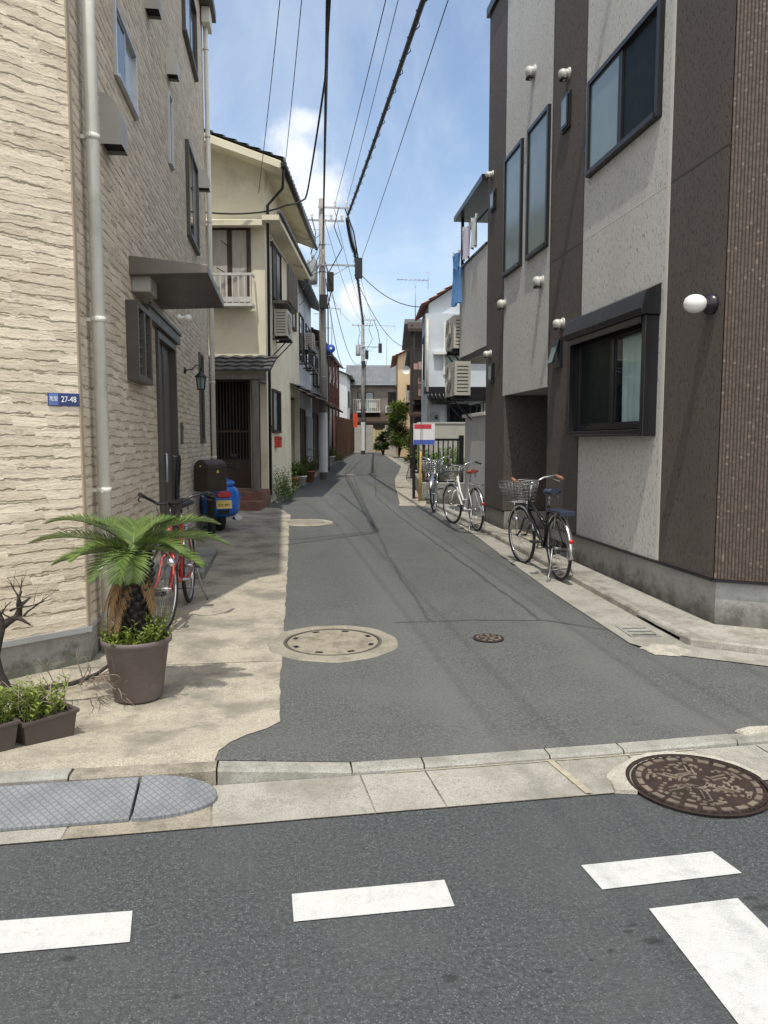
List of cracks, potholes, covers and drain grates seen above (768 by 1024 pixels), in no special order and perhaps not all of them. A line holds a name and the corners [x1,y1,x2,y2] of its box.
manhole cover [268,625,398,663]
drain grate [615,625,662,638]
utility cover [473,634,504,643]
manhole cover [606,751,768,818]
